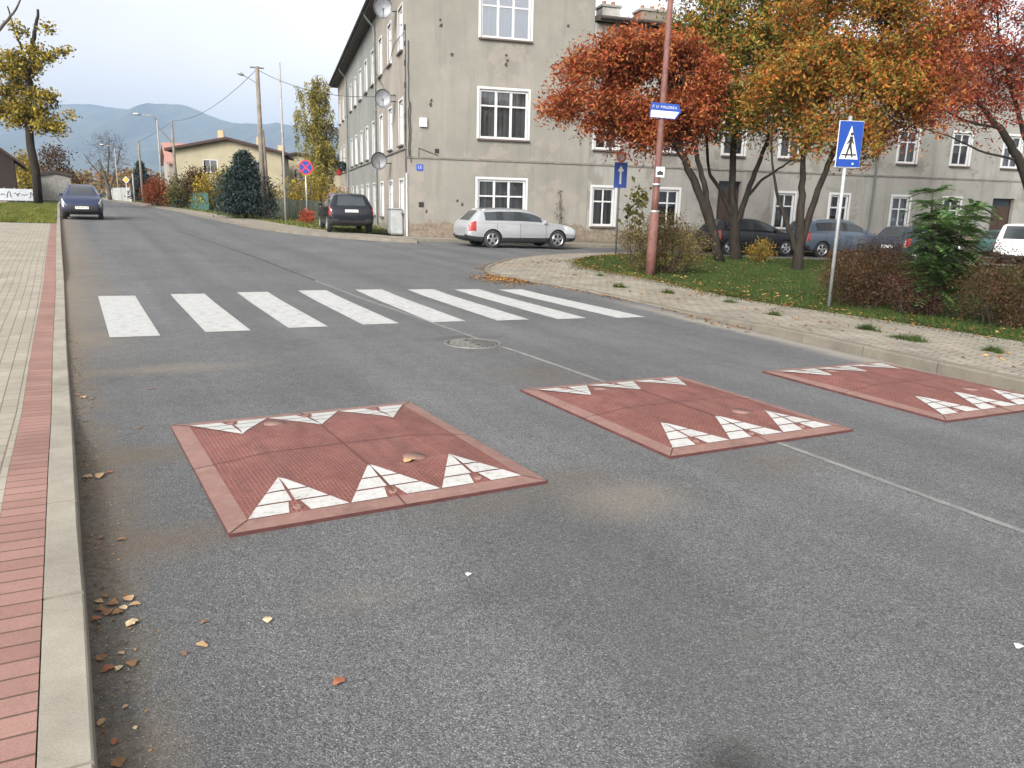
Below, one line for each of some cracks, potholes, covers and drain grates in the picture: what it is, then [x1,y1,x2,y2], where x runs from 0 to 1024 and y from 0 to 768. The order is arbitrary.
manhole cover [444,338,502,349]
